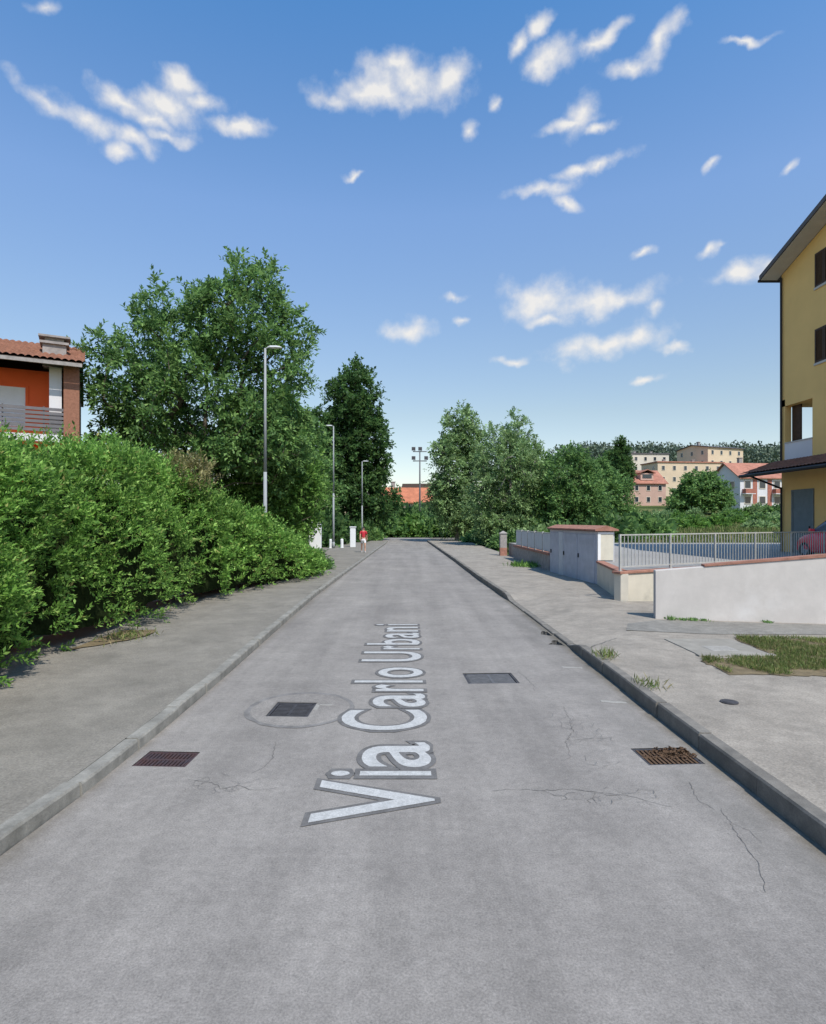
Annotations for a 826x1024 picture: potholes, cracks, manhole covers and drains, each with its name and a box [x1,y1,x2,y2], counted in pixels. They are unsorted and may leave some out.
crack [540,704,620,766]
drain grate [133,752,199,767]
crack [495,787,671,807]
crack [189,747,275,794]
drain grate [631,746,704,765]
crack [689,782,765,890]
manhole cover [463,673,519,684]
